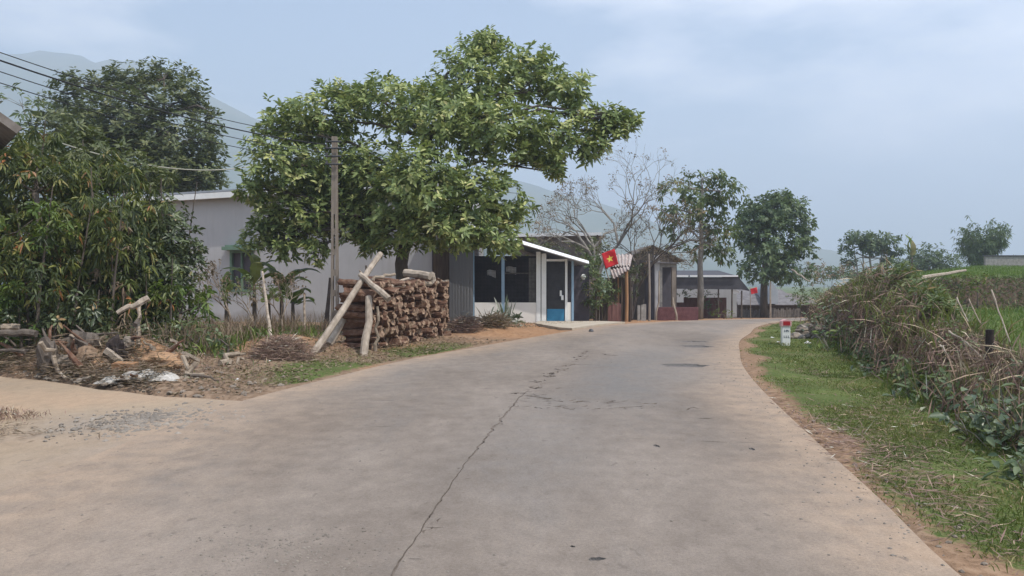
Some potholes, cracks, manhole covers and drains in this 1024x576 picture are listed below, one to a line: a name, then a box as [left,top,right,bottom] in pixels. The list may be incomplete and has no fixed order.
crack [370,351,657,576]
